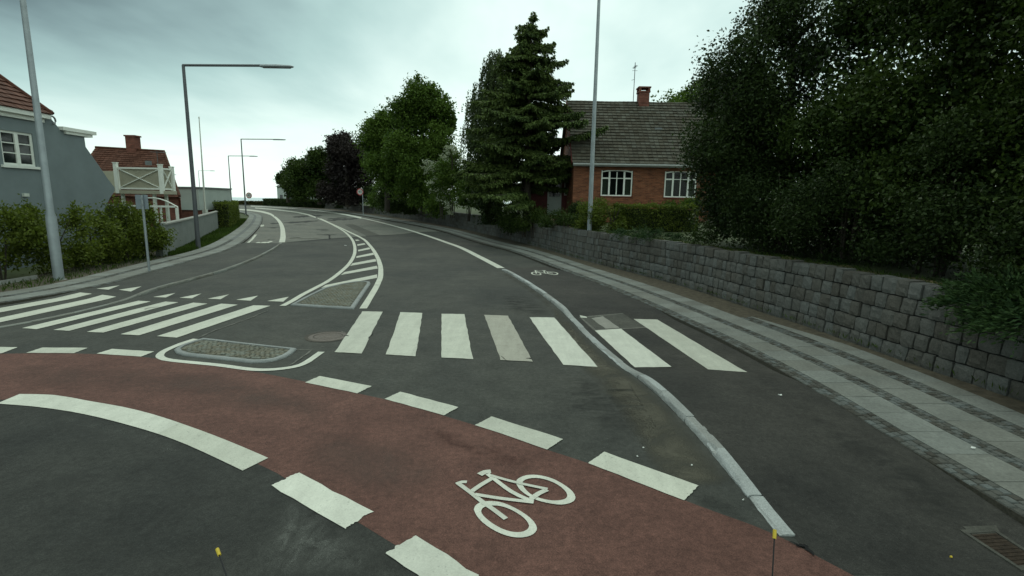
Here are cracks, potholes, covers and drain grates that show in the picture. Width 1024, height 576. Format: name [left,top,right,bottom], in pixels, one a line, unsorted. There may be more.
drain grate [960,525,1024,572]
manhole cover [304,331,348,342]
